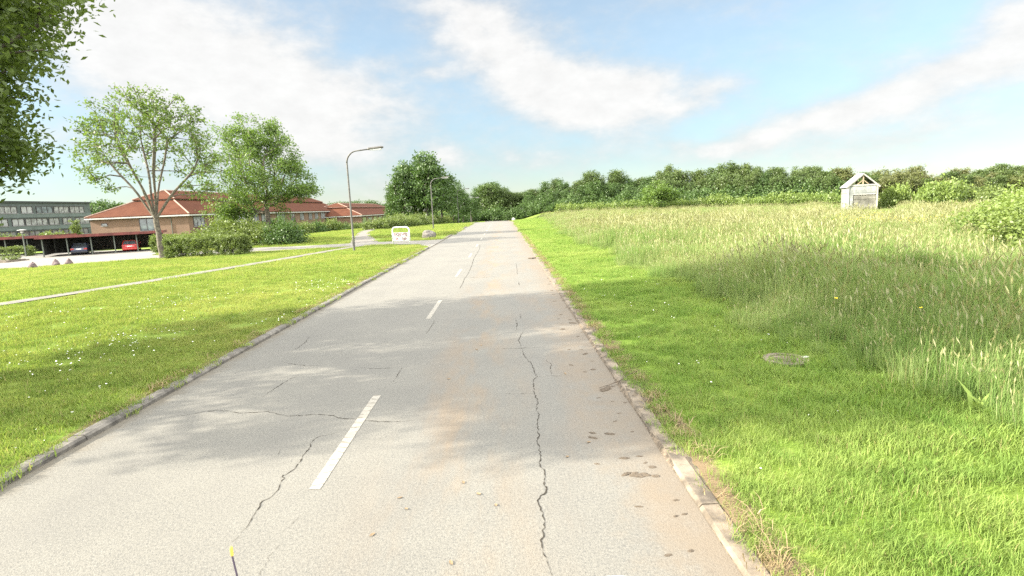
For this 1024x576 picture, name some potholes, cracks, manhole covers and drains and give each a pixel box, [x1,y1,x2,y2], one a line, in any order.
crack [188,411,412,422]
crack [232,435,325,542]
crack [502,332,564,574]
manhole cover [762,353,809,367]
